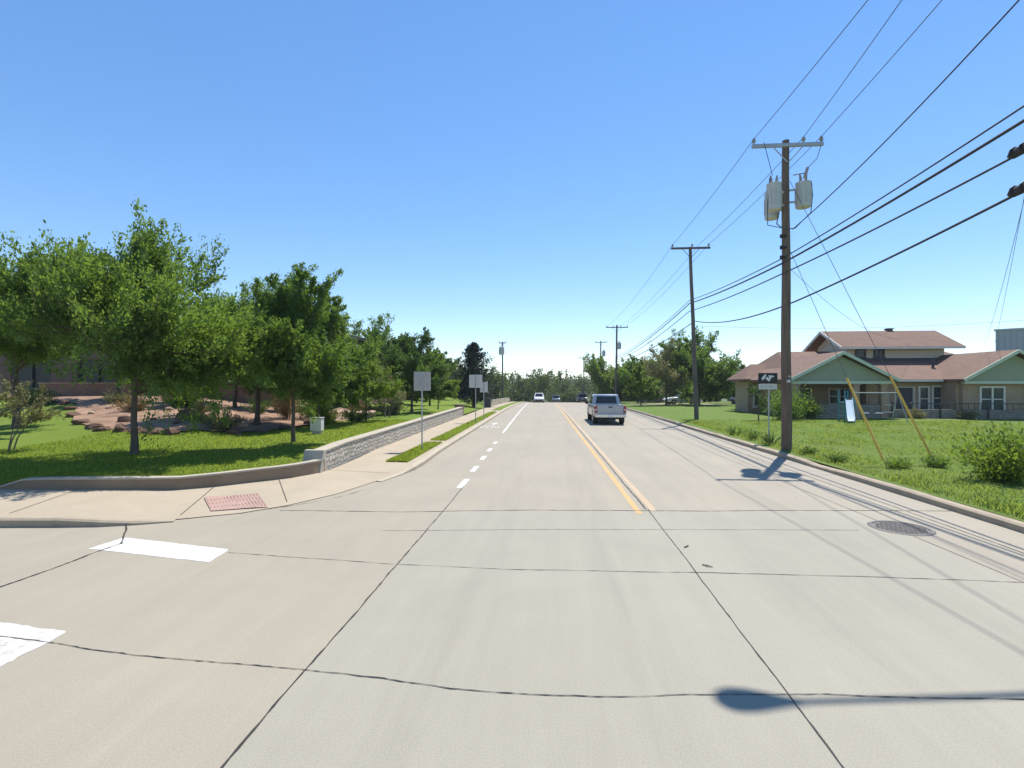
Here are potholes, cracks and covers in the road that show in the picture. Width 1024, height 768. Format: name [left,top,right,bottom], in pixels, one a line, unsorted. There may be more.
manhole cover [867,520,936,536]
